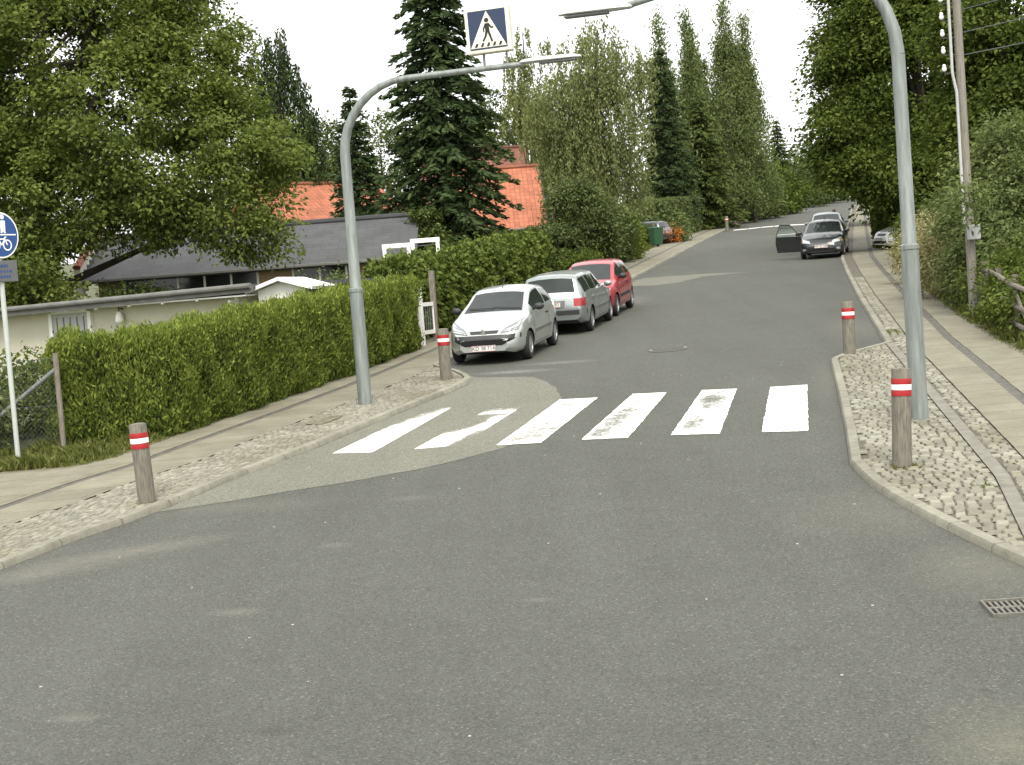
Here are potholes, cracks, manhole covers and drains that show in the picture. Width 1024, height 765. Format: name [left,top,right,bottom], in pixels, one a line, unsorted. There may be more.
drain grate [979,597,1024,618]
